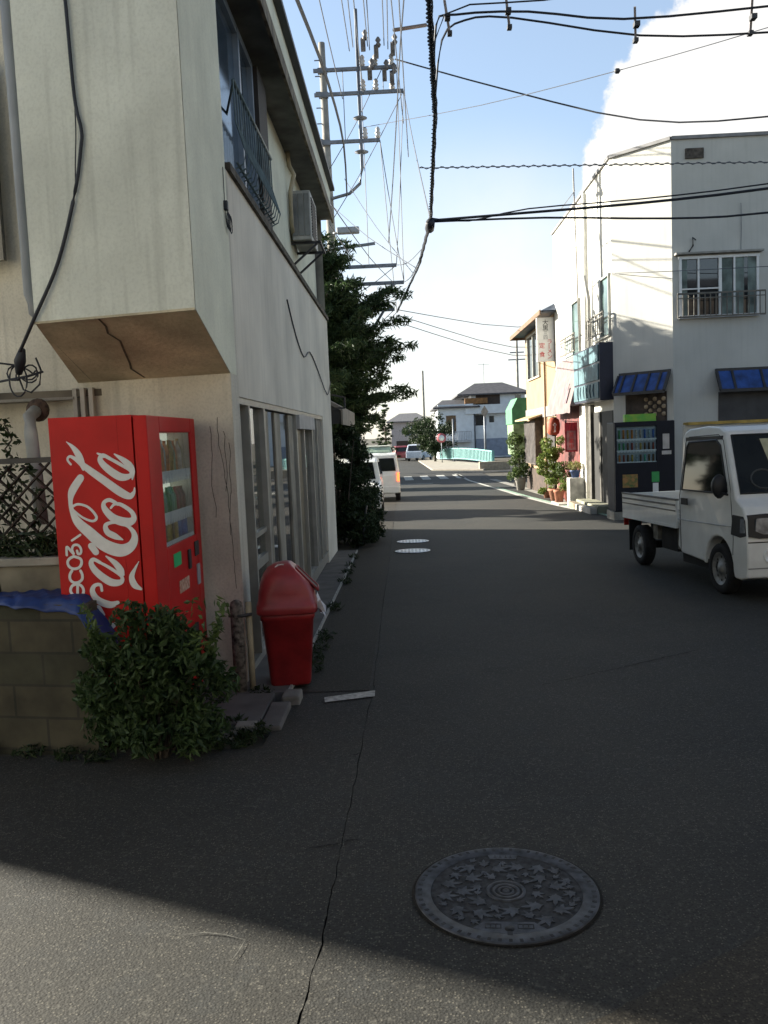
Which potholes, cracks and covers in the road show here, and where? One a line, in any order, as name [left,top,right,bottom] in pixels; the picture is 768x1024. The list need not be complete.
crack [543,649,699,685]
manhole cover [412,847,603,947]
crack [297,522,394,1024]
